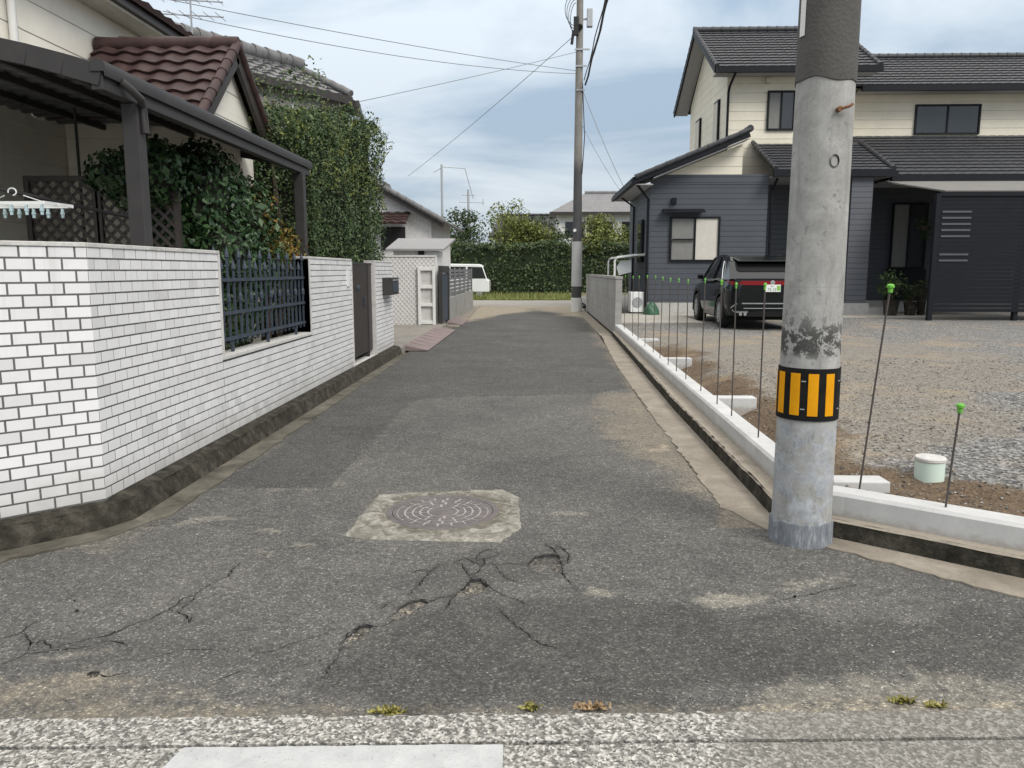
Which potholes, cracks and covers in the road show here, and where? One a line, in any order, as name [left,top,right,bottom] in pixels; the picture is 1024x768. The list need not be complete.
crack [236,545,576,676]
crack [2,563,240,664]
manhole cover [386,495,499,530]
crack [86,649,228,677]
